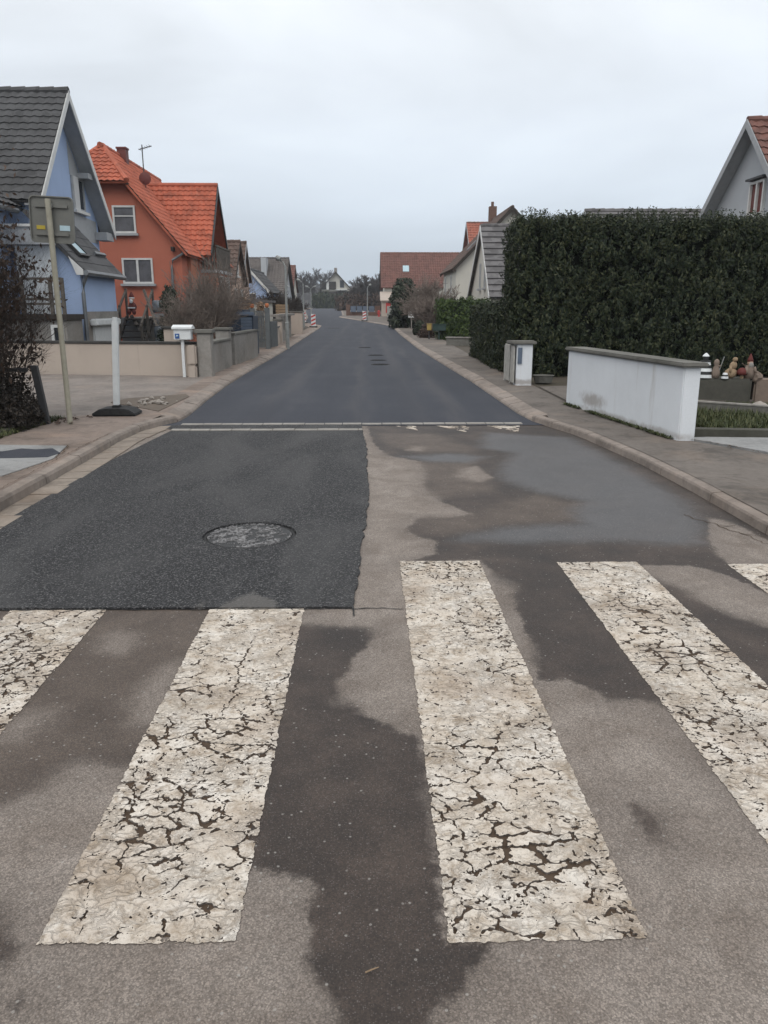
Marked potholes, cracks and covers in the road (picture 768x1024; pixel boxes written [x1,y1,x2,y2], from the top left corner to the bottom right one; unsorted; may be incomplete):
manhole cover [203,523,296,548]
